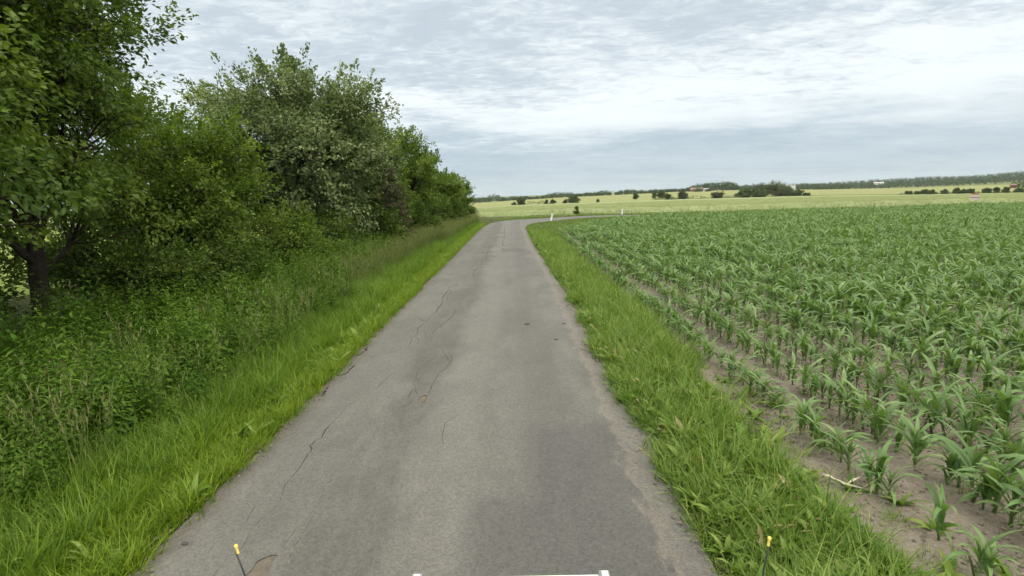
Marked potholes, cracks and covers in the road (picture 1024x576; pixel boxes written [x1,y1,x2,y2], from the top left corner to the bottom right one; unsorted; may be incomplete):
crack [213,347,371,576]
crack [385,229,521,407]
